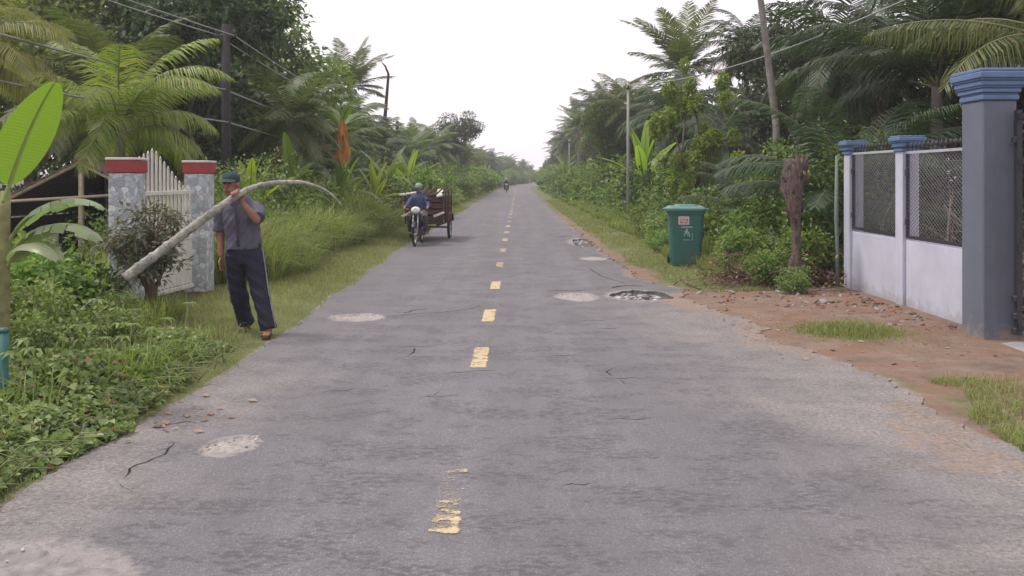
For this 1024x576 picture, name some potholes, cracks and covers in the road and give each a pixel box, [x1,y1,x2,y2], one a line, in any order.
pothole [572,239,594,247]
crack [399,345,495,374]
crack [556,269,635,291]
pothole [609,290,674,301]
crack [120,443,174,492]
